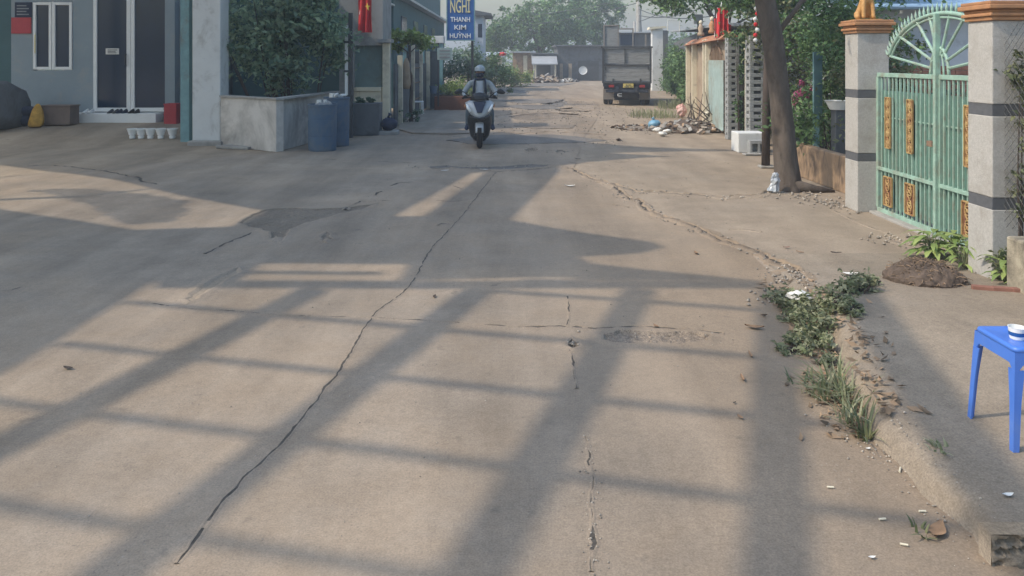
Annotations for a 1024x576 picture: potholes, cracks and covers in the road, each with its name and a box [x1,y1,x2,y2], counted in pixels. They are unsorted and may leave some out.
crack [151,159,912,564]
crack [27,165,158,185]
